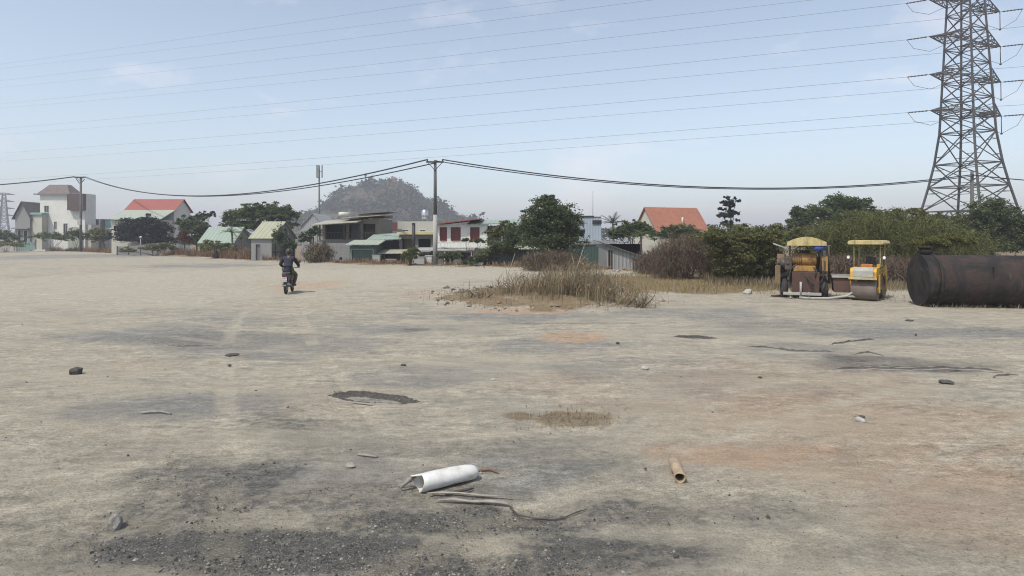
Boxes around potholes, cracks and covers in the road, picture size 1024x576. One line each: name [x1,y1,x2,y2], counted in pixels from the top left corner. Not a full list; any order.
pothole [323,389,425,405]
crack [746,338,1019,378]
